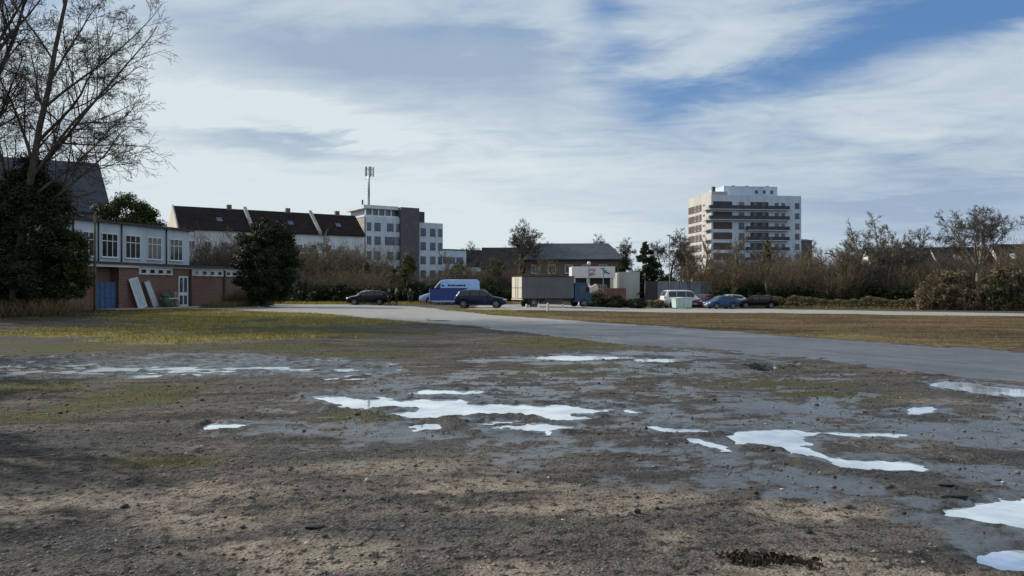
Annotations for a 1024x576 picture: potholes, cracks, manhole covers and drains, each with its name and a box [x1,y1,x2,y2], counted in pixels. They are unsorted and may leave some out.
pothole [739,361,797,372]
